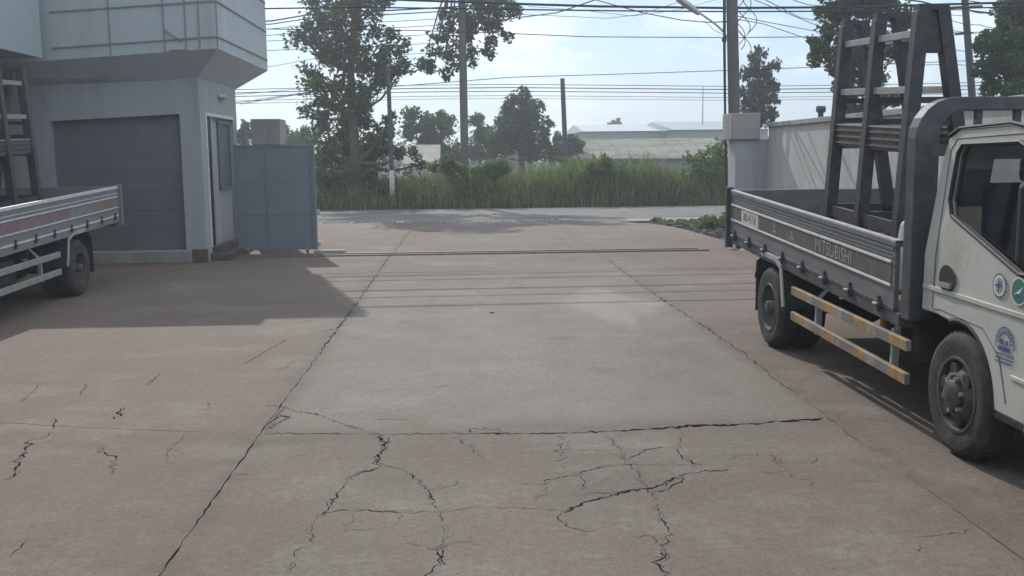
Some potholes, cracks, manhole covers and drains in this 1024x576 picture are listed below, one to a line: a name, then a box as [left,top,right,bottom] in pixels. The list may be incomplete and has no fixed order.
crack [266,405,482,576]
crack [98,436,119,474]
crack [5,419,57,480]
crack [497,432,818,576]
